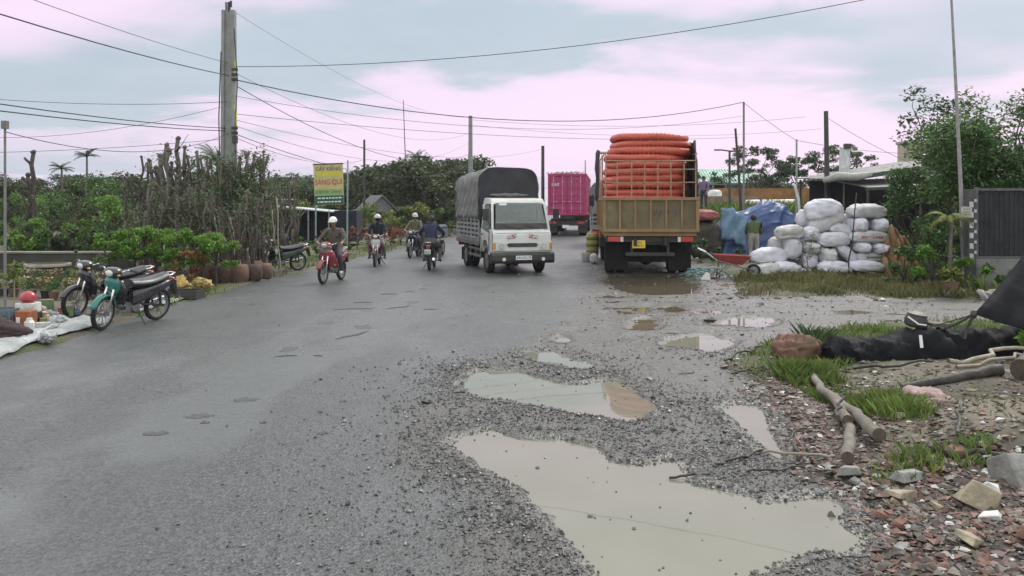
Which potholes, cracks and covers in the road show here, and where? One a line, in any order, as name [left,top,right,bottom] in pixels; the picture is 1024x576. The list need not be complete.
pothole [657,333,743,353]
pothole [704,315,782,328]
pothole [452,366,670,422]
pothole [516,348,605,371]
pothole [436,424,881,576]
pothole [711,399,796,463]
pothole [597,273,707,295]
pothole [547,332,573,343]
pothole [621,315,667,331]
